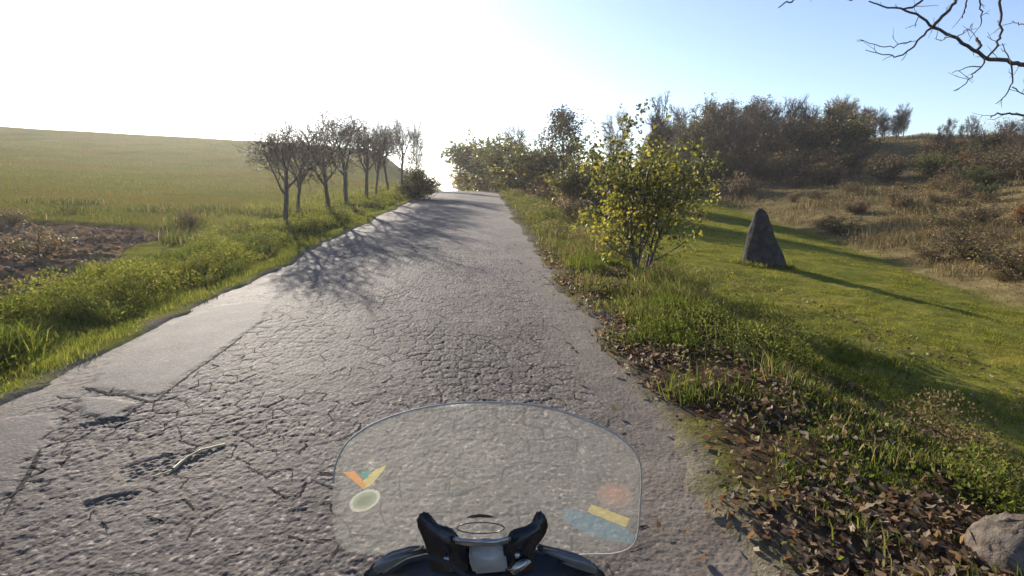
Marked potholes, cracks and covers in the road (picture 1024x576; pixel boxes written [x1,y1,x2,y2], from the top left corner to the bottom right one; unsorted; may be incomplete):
pothole [118,451,214,482]
pothole [81,492,140,508]
pothole [78,418,130,429]
crack [0,242,648,576]
